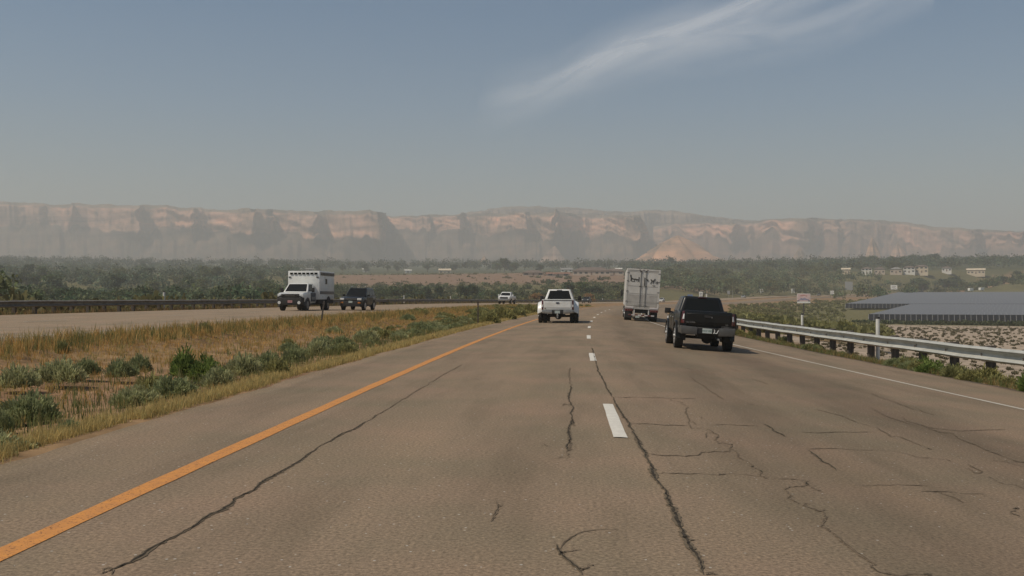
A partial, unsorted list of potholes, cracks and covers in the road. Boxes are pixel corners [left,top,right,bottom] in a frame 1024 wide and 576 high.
crack [555,528,612,574]
crack [613,355,1022,576]
crack [101,365,461,574]
crack [491,501,502,521]
crack [543,368,576,458]
